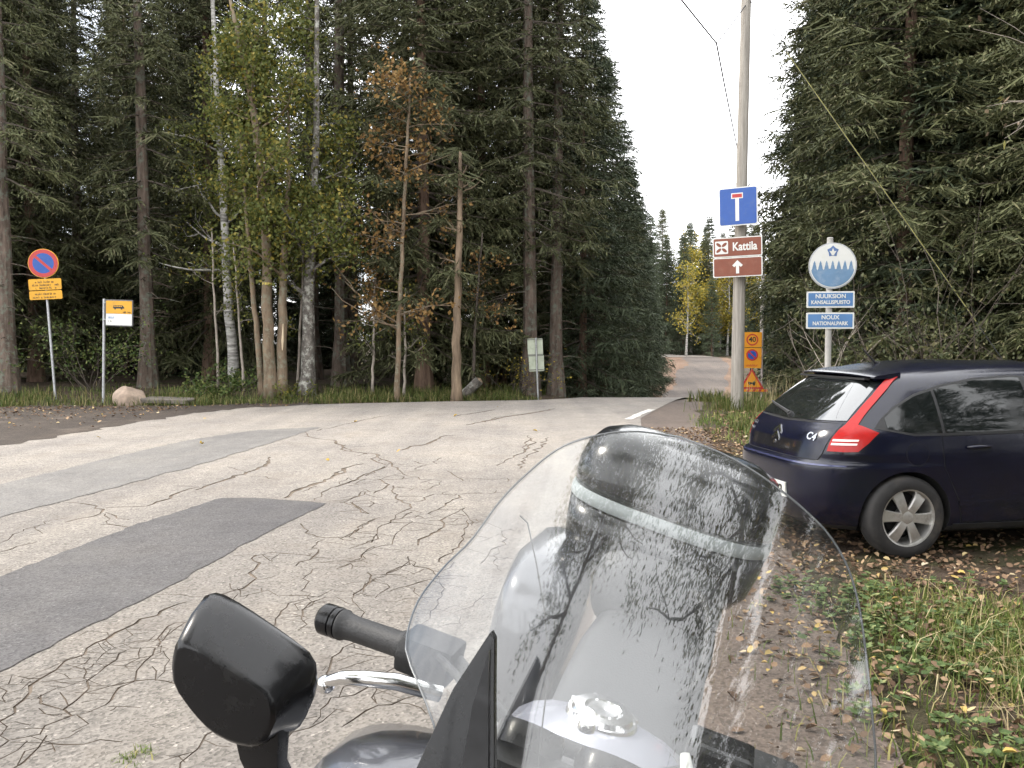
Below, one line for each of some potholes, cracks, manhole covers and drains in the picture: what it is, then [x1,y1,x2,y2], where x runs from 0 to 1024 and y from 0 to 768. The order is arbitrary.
crack [496,436,547,468]
crack [0,602,228,768]
crack [1,415,514,736]
